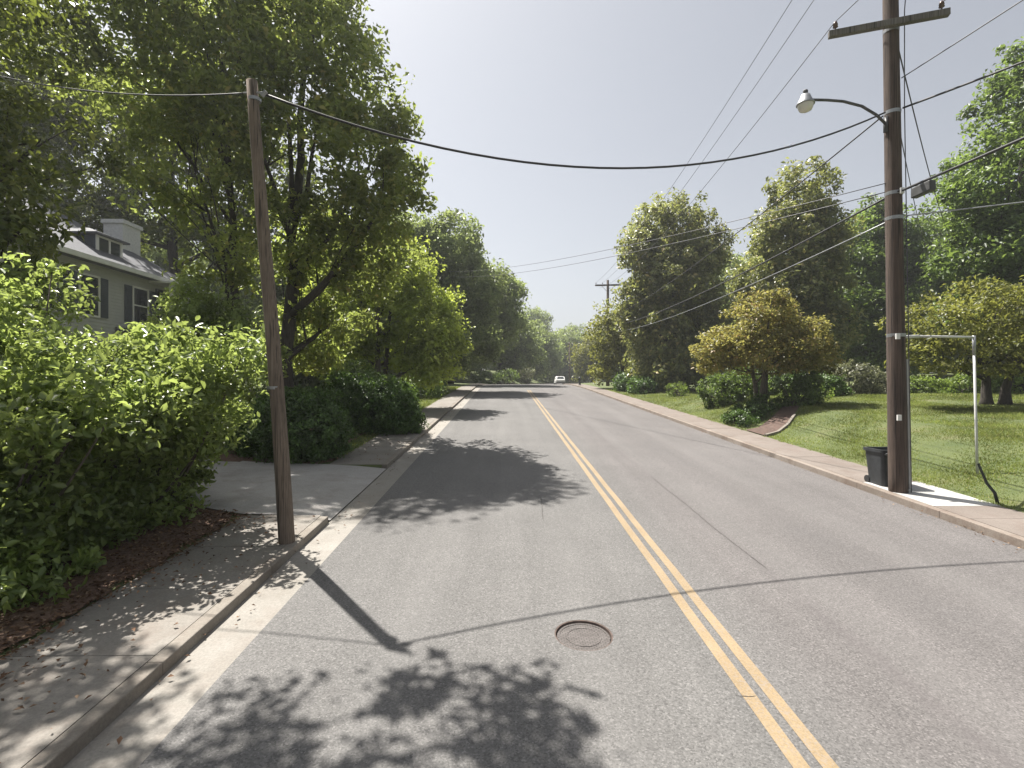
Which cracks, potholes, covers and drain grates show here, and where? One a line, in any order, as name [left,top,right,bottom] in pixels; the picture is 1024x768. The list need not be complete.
manhole cover [555,620,613,651]
